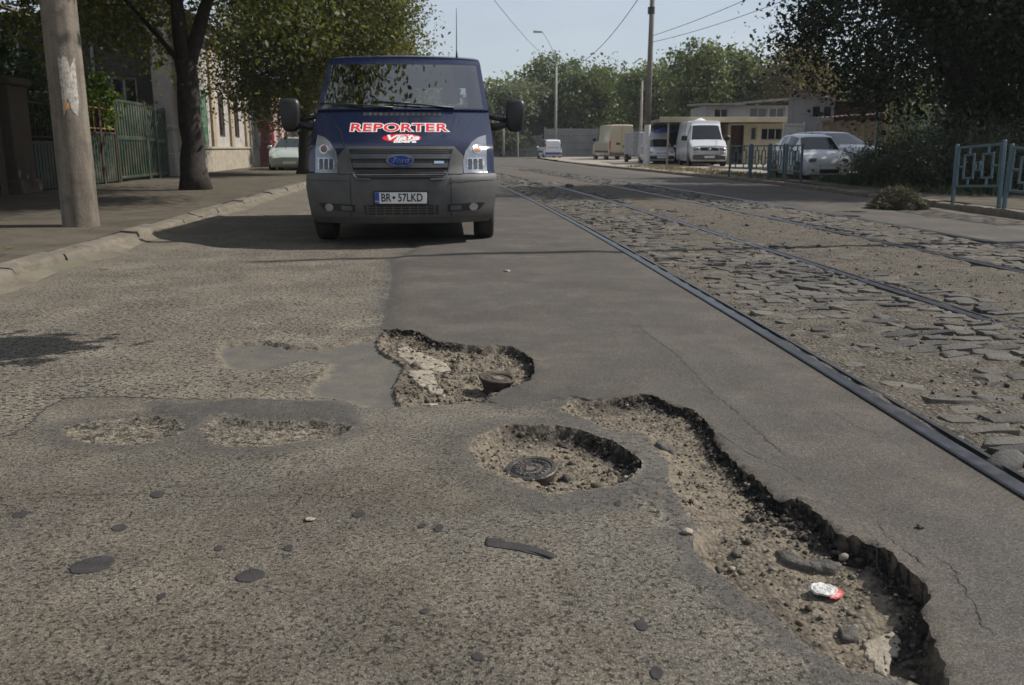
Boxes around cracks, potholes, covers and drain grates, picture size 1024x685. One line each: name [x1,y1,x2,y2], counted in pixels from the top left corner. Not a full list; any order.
manhole cover [479,372,516,396]
crack [863,523,995,635]
pothole [377,329,535,407]
pothole [558,394,950,685]
manhole cover [505,456,557,487]
pothole [64,416,184,445]
pothole [200,417,352,448]
pothole [468,424,642,494]
